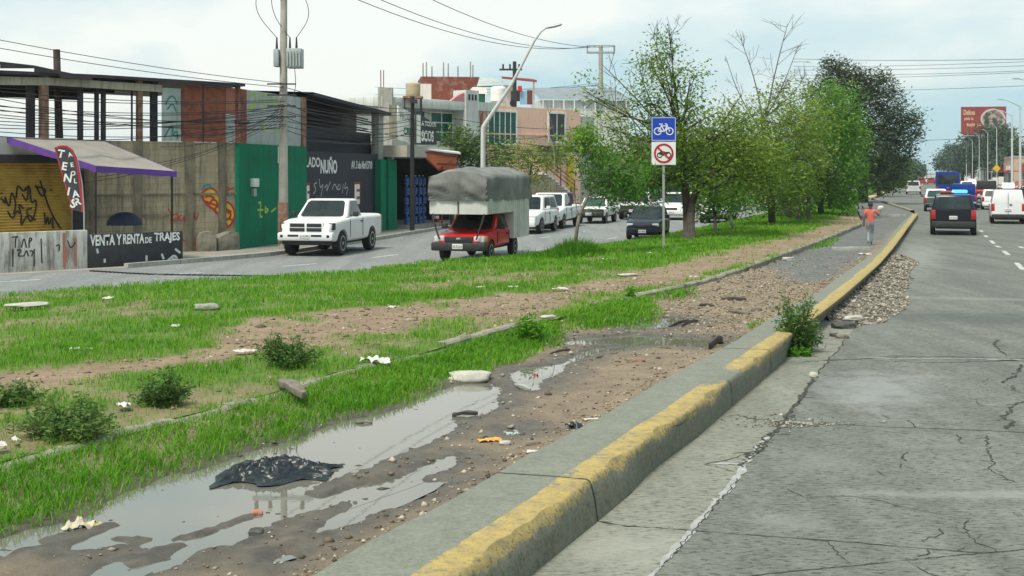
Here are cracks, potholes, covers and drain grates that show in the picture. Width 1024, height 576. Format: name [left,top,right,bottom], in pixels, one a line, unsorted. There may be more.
crack [730,412,816,429]
crack [957,340,1024,483]
crack [706,451,751,471]
pothole [829,253,918,326]
